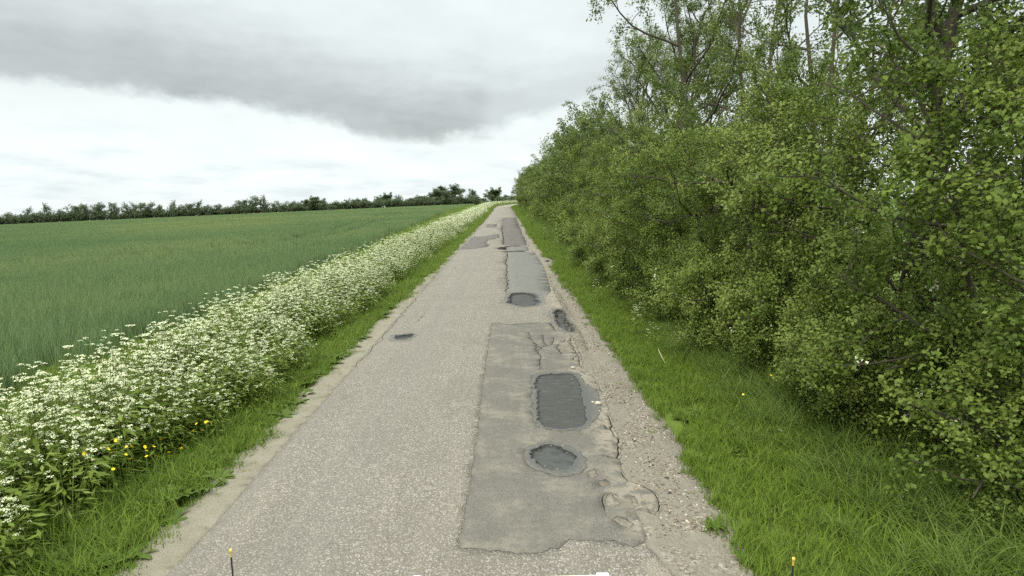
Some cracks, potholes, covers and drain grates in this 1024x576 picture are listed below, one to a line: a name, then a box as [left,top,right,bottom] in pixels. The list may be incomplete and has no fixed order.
crack [511,323,580,365]
crack [602,416,660,511]
pothole [503,291,547,308]
pothole [524,442,587,476]
pothole [390,333,419,341]
pothole [549,308,580,333]
